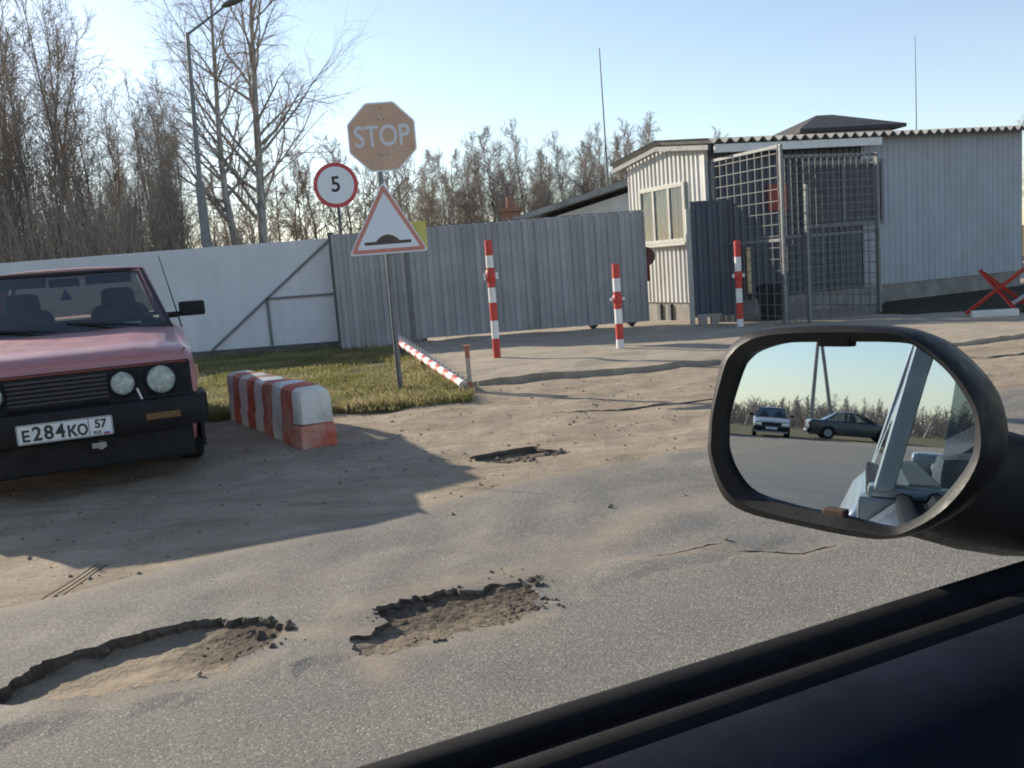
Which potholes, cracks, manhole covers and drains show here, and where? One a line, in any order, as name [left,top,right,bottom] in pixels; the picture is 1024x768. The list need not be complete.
pothole [0,615,307,706]
crack [642,543,720,557]
pothole [349,568,564,657]
crack [738,545,835,554]
pothole [469,446,571,464]
crack [561,399,713,413]
